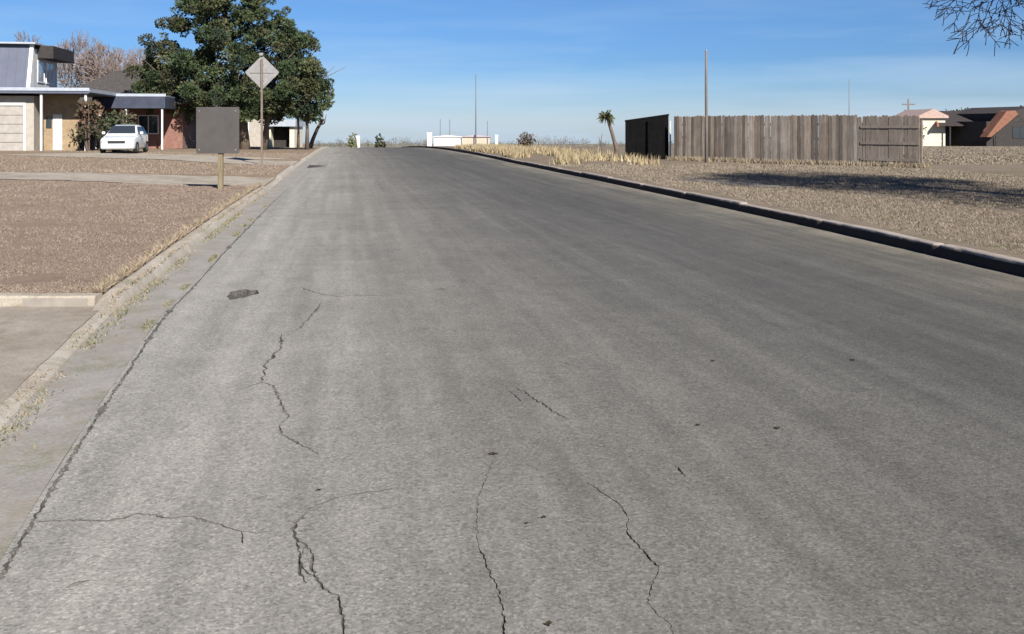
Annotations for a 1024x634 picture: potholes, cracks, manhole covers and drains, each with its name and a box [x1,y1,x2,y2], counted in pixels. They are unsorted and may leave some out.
crack [0,190,390,588]
crack [587,483,673,633]
crack [291,489,389,634]
crack [476,460,506,634]
pothole [227,289,259,300]
crack [511,389,564,418]
